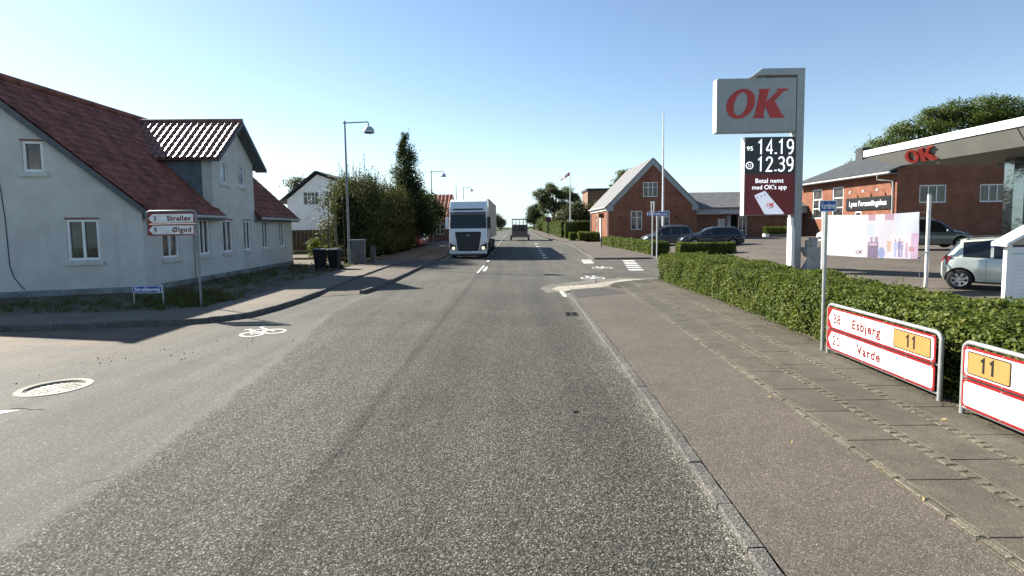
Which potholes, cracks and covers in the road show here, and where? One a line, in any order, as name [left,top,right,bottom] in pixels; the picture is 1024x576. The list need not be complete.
manhole cover [12,378,95,398]
